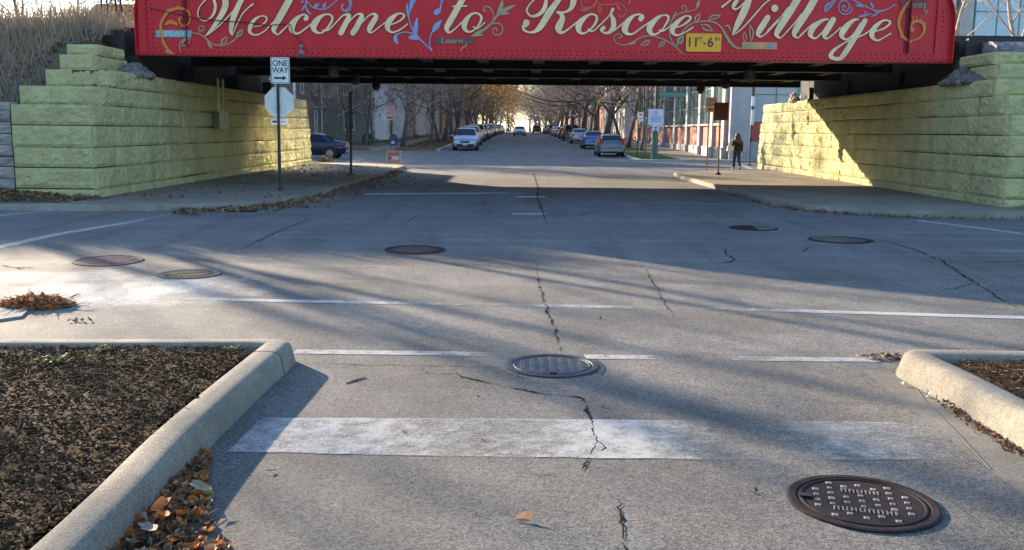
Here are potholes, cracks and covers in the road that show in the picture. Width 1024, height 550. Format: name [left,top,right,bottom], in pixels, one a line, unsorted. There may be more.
manhole cover [505,354,605,378]
crack [595,248,735,313]
manhole cover [808,236,874,244]
crack [882,240,1018,307]
crack [318,363,607,471]
manhole cover [155,269,221,279]
crack [532,173,548,224]
crack [532,268,561,351]
manhole cover [71,255,144,267]
manhole cover [384,245,445,254]
crack [616,499,629,550]
manhole cover [787,475,942,534]
